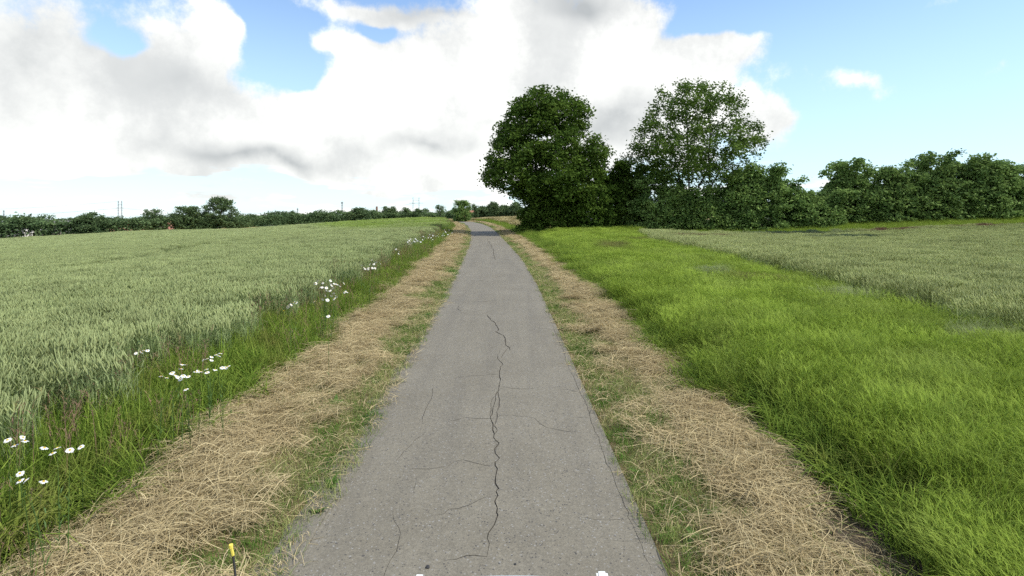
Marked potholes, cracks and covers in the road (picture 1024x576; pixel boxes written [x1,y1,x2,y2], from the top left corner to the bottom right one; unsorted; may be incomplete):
crack [413,300,583,560]
